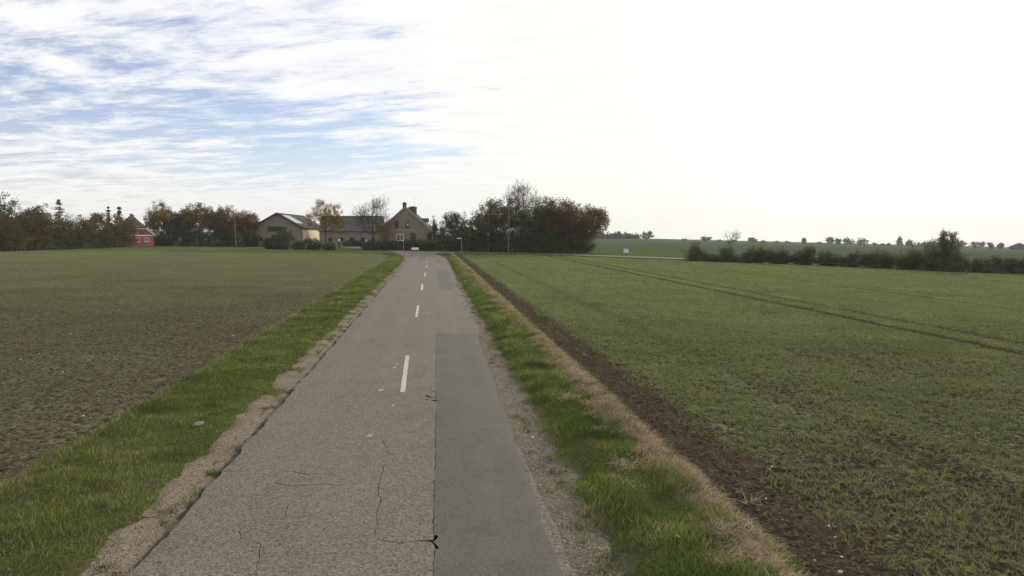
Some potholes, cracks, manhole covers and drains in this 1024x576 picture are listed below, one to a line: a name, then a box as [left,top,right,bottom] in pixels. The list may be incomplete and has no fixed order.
crack [375,391,446,576]
